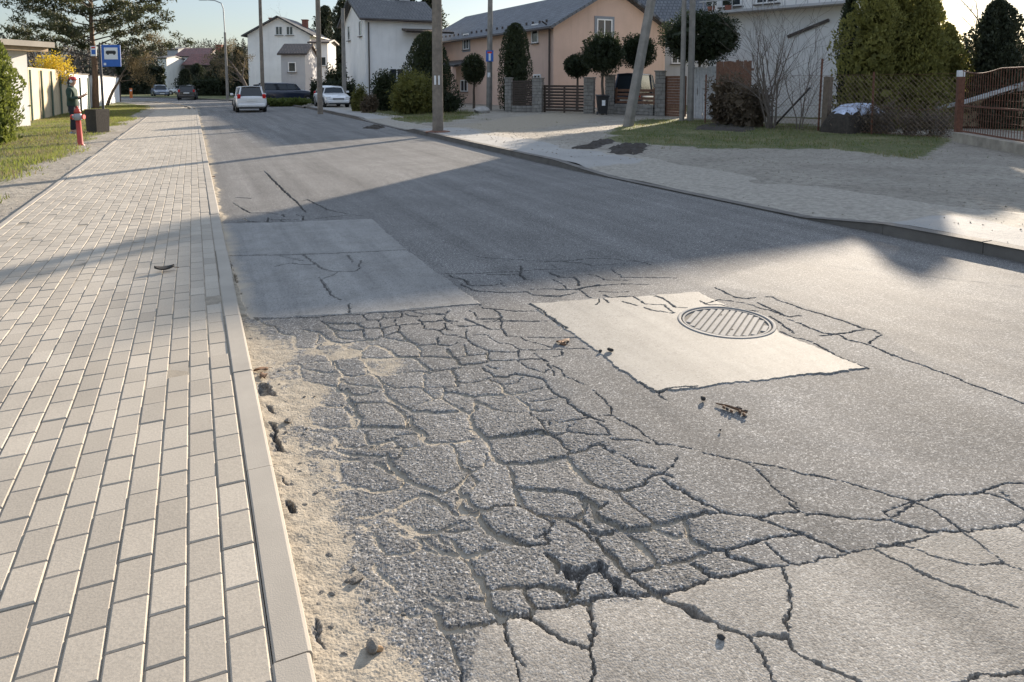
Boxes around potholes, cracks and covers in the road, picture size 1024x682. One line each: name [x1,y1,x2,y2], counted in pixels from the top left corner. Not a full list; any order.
crack [243,255,1024,682]
crack [233,169,362,223]
